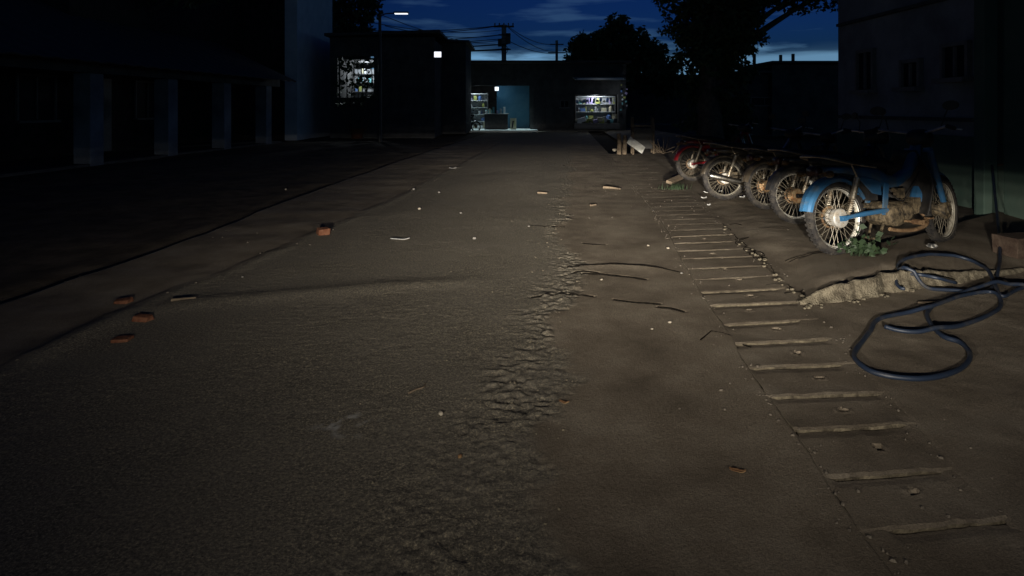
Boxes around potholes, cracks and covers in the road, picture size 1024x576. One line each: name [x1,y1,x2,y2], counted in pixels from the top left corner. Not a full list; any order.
crack [531,263,680,298]
crack [613,299,685,312]
